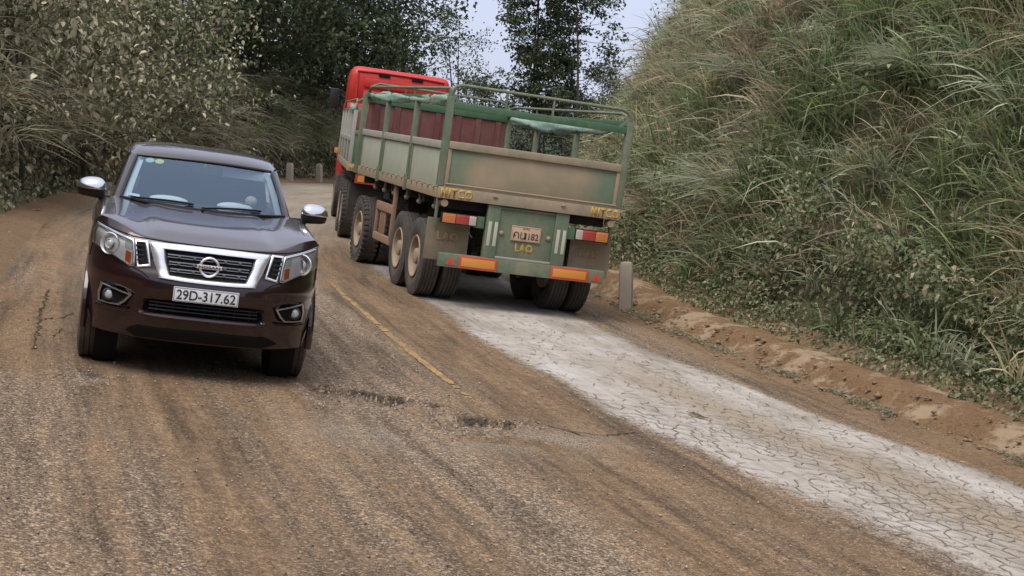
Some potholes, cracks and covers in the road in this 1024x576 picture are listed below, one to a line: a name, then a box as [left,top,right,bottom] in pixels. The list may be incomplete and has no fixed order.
crack [400,287,1024,576]
pothole [296,382,416,413]
pothole [412,401,538,438]
crack [31,289,74,349]
